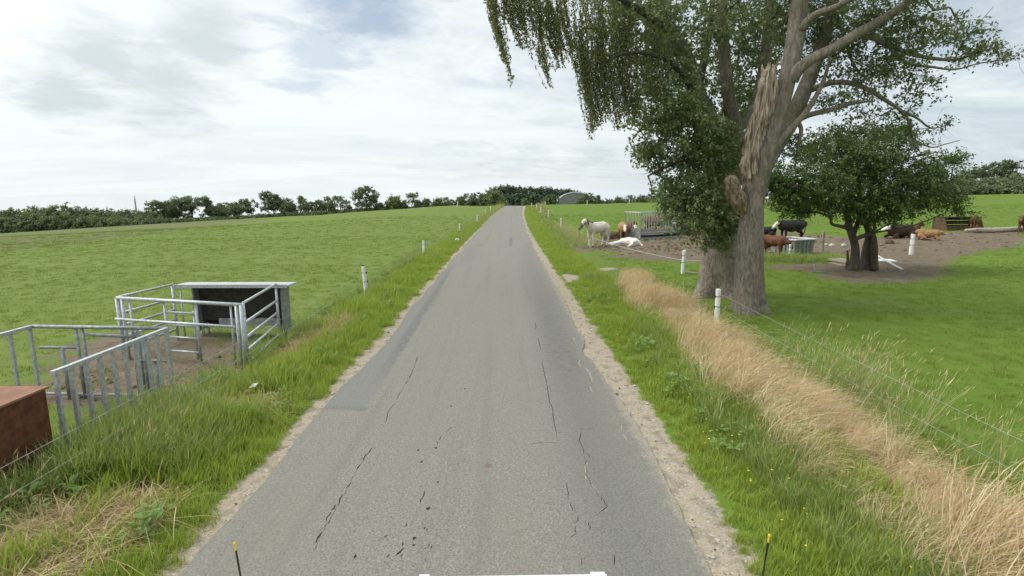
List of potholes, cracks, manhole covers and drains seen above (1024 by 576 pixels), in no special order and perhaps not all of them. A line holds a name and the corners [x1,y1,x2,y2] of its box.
crack [534,323,570,444]
crack [385,427,452,562]
crack [567,428,608,538]
crack [316,448,372,542]
